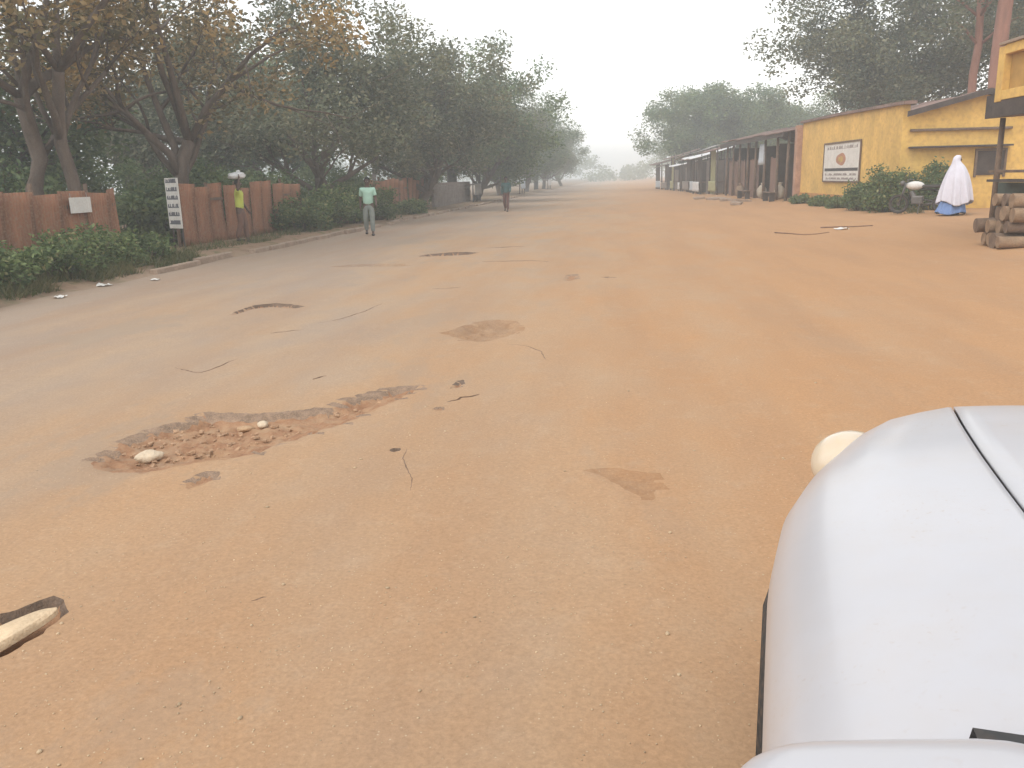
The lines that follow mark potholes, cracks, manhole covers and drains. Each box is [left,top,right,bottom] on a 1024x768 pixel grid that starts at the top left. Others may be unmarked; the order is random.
pothole [75,385,427,479]
pothole [178,471,224,492]
pothole [228,303,305,316]
